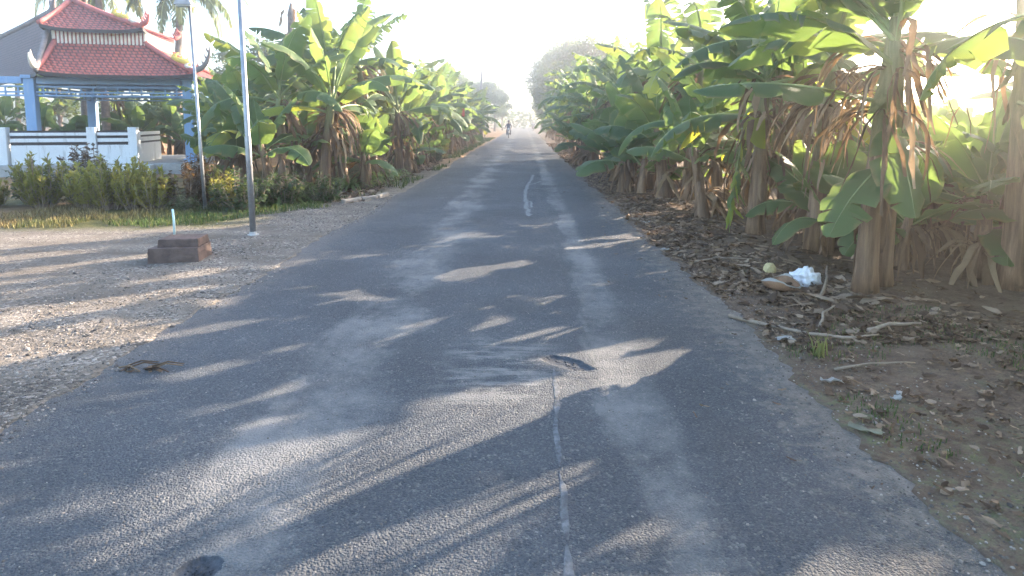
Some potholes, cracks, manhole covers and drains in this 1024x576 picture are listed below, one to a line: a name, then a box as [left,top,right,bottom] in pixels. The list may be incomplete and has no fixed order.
pothole [527,350,610,379]
